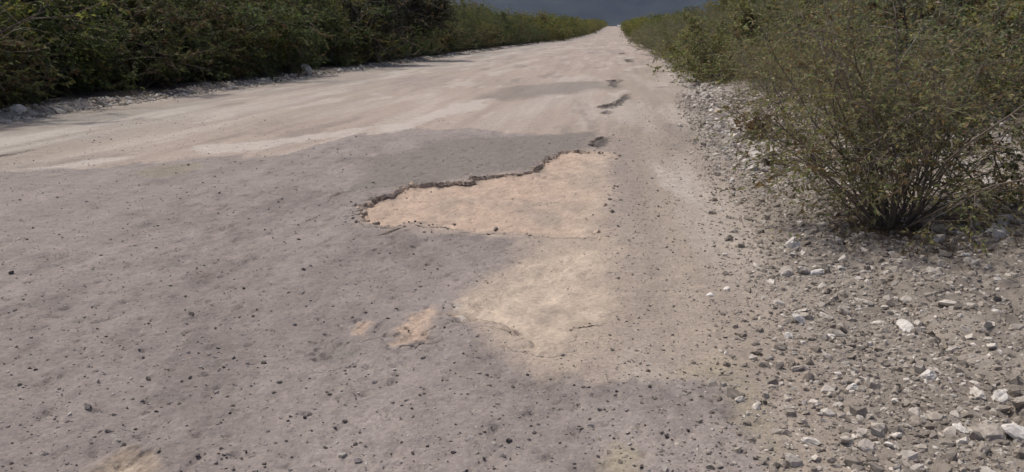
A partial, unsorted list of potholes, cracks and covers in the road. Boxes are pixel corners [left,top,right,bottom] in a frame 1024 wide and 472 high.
pothole [347,150,624,239]
pothole [380,300,449,351]
pothole [597,94,632,109]
